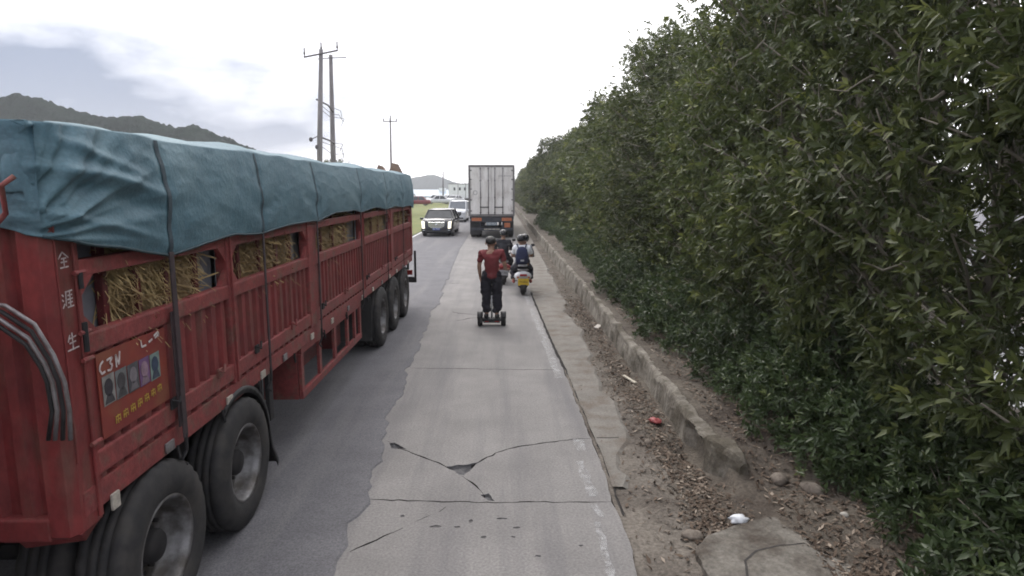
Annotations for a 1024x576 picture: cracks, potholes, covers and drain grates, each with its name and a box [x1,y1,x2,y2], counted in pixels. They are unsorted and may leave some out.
pothole [447,462,479,475]
crack [350,508,444,552]
crack [388,293,625,516]
